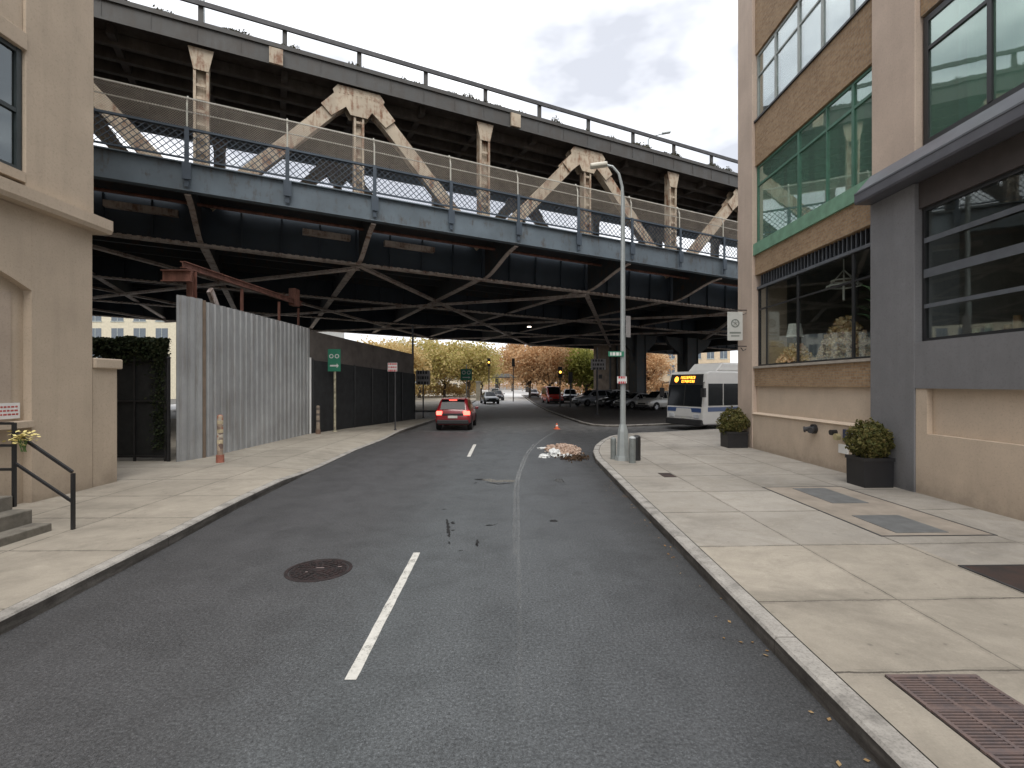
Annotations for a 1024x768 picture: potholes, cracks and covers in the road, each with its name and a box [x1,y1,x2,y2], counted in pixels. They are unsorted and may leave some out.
manhole cover [284,559,353,582]
drain grate [885,674,1024,768]
utility cover [852,515,949,533]
utility cover [793,488,868,503]
